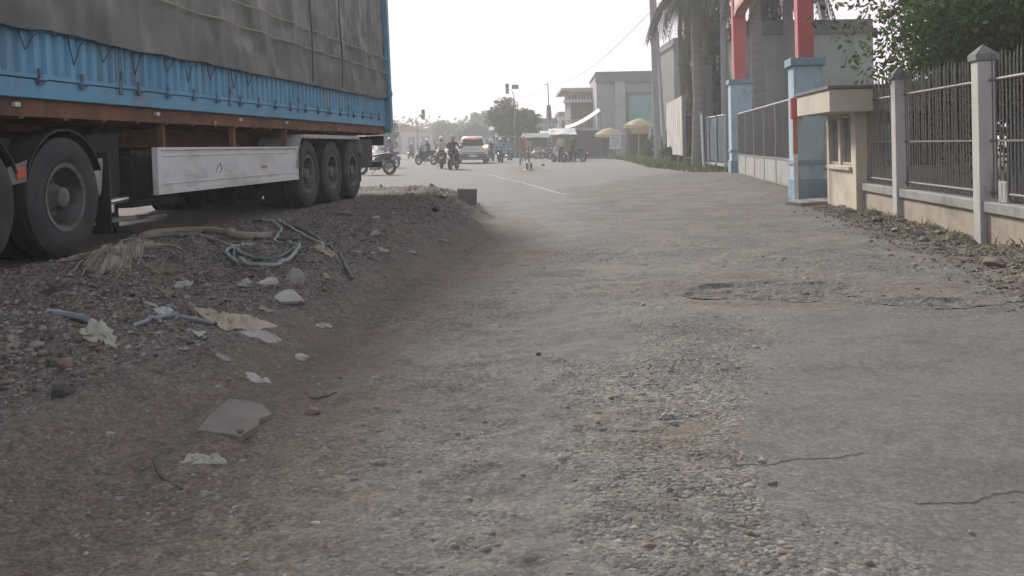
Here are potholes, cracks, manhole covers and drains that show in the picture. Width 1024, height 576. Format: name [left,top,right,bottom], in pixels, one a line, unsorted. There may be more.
crack [715,452,864,469]
pothole [662,280,866,303]
crack [913,491,1023,504]
